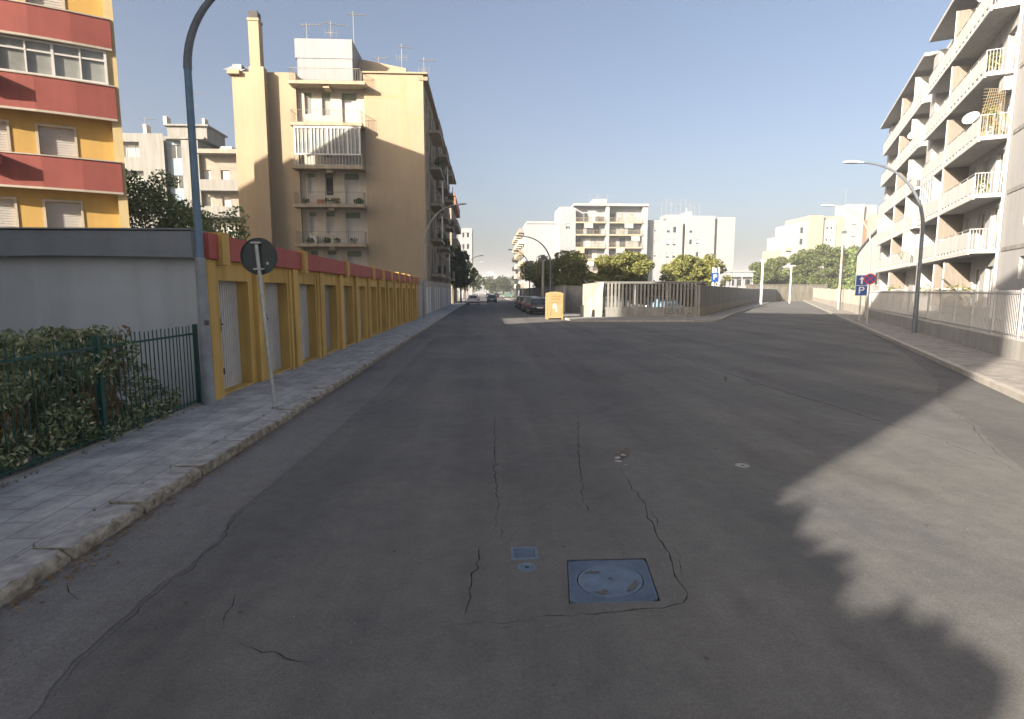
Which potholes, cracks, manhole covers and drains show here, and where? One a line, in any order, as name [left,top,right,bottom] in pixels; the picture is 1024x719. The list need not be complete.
manhole cover [568,559,658,603]
crack [493,413,553,538]
crack [445,468,688,629]
manhole cover [511,547,539,560]
crack [223,592,314,662]
manhole cover [518,563,536,572]
